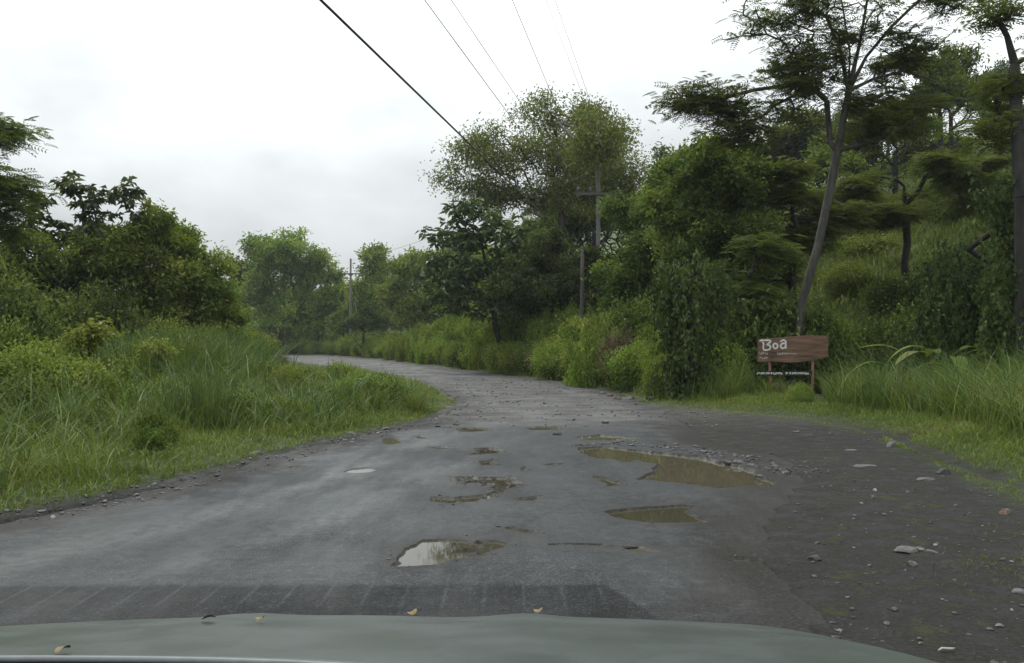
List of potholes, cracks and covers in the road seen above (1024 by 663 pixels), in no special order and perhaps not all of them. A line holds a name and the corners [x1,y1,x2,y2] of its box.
pothole [578,446,776,488]
pothole [602,504,708,523]
pothole [390,538,507,566]
pothole [429,476,530,504]
pothole [505,526,535,535]
pothole [468,447,506,455]
